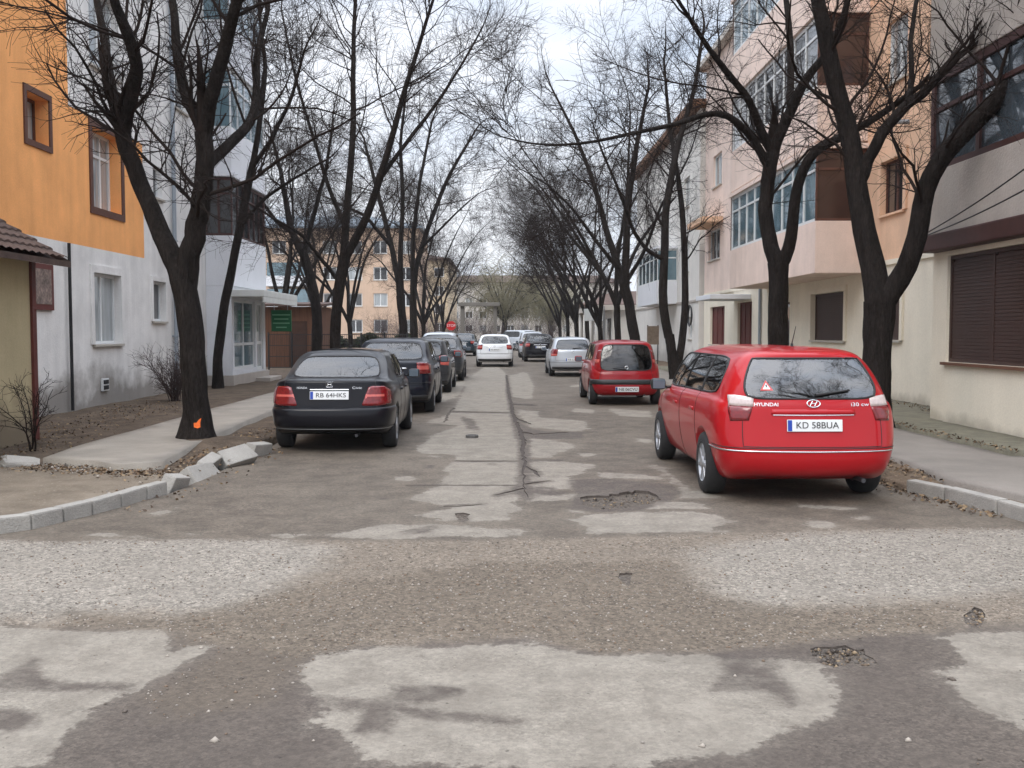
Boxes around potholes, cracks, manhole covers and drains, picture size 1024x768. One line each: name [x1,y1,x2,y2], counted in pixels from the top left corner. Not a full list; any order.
pothole [580,490,661,509]
pothole [811,645,879,669]
pothole [963,607,985,628]
pothole [618,573,632,586]
